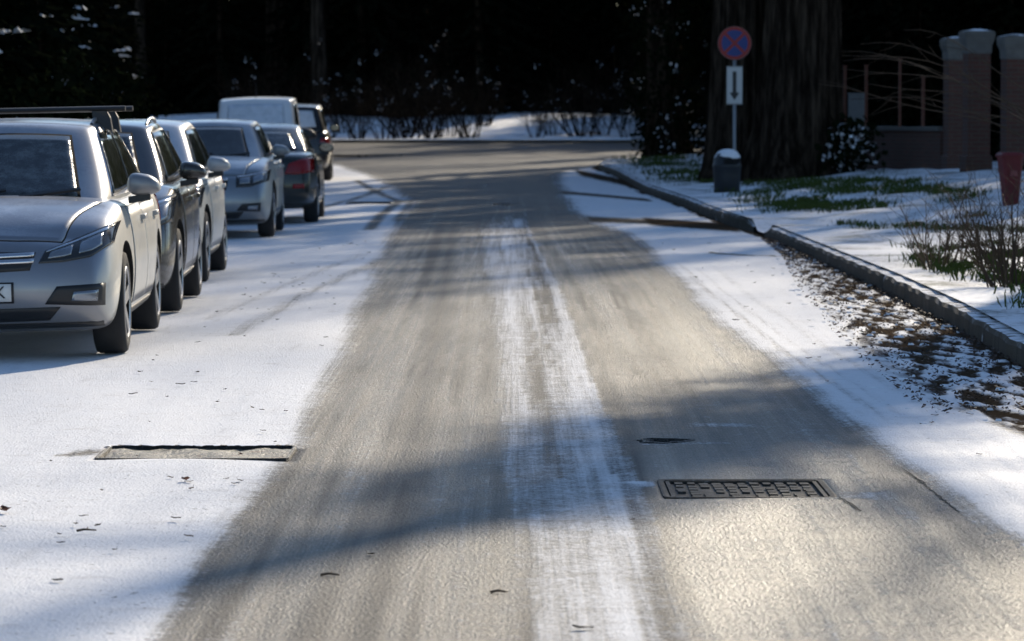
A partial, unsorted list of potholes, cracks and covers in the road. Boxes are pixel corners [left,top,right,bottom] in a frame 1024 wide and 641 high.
manhole cover [95,444,297,462]
